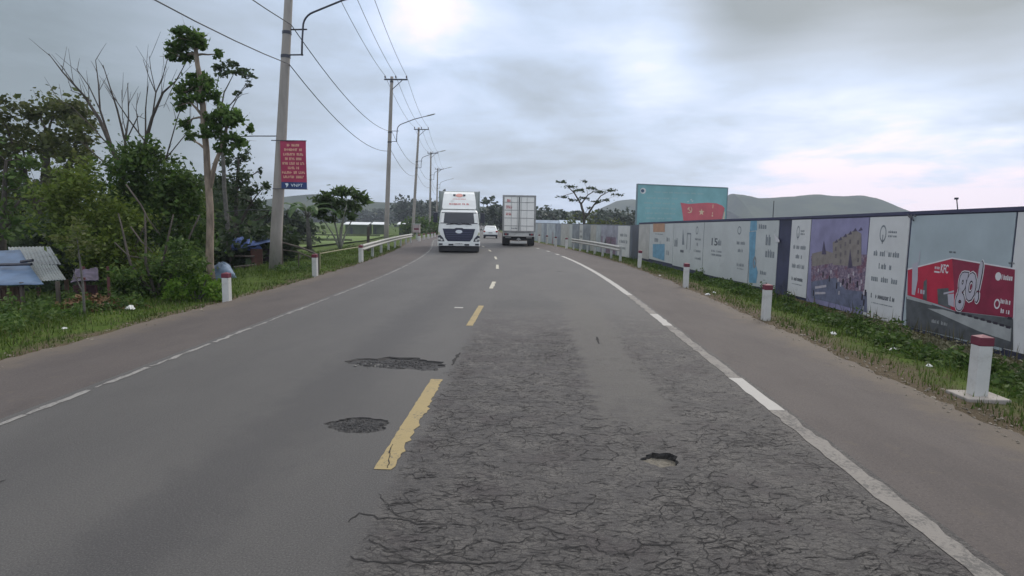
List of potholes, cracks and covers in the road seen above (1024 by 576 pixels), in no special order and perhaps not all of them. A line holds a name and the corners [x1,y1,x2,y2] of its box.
pothole [640,452,679,468]
crack [348,329,966,576]
